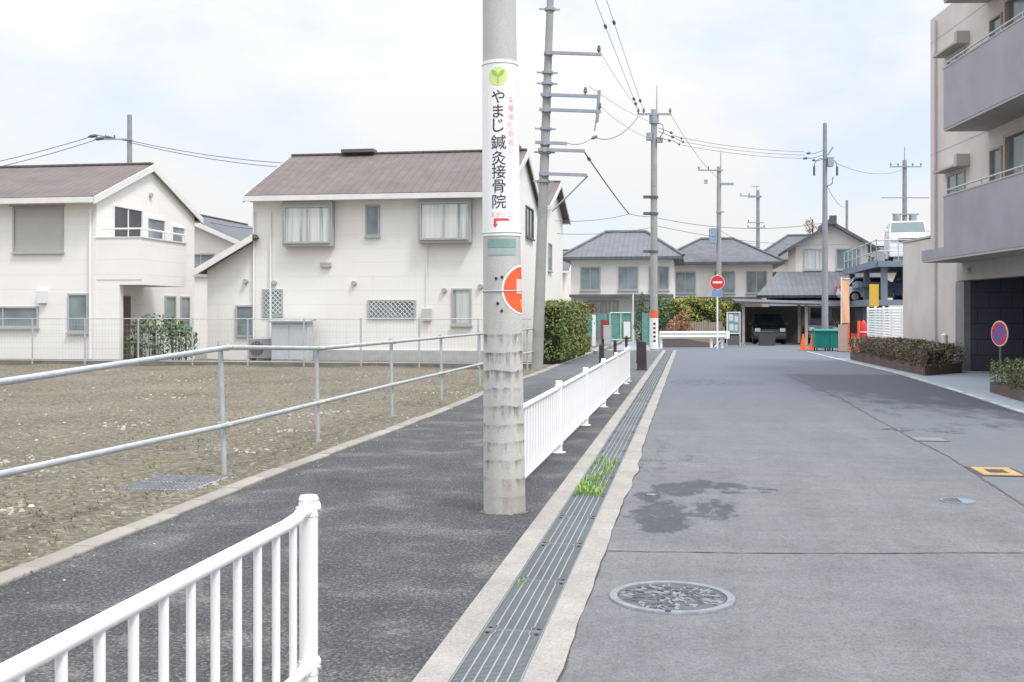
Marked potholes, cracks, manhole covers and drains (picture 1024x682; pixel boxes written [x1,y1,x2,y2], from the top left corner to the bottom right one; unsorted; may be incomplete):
drain grate [608,432,636,441]
drain grate [516,543,584,581]
drain grate [592,451,627,463]
drain grate [483,580,567,632]
manhole cover [609,581,736,615]
drain grate [448,629,544,682]
drain grate [583,463,621,478]
drain grate [600,440,632,451]
drain grate [540,516,597,545]
drain grate [558,495,607,517]
drain grate [613,424,639,432]
drain grate [571,477,615,495]
